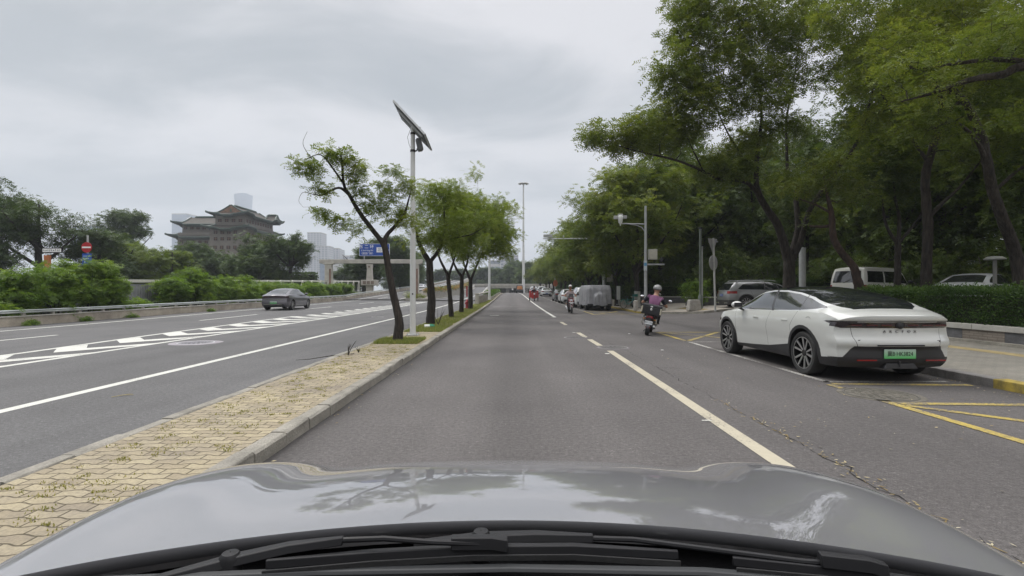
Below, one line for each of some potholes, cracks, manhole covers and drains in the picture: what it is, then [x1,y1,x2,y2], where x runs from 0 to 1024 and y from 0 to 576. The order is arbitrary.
manhole cover [836,387,928,402]
crack [544,308,1024,563]
